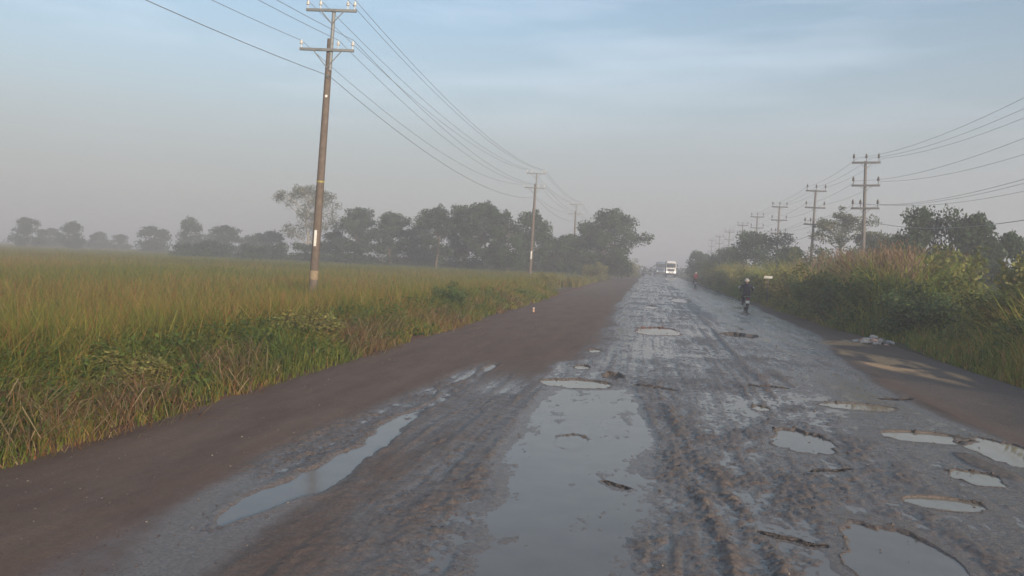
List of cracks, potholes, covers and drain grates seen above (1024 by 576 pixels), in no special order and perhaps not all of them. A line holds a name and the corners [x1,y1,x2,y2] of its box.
pothole [769,426,841,455]
pothole [554,433,588,450]
pothole [952,435,1024,468]
pothole [816,401,900,412]
pothole [635,326,683,336]
pothole [900,495,990,513]
pothole [878,429,979,446]
pothole [601,371,626,380]
pothole [538,377,613,389]
pothole [837,518,971,576]
pothole [943,468,1008,488]
